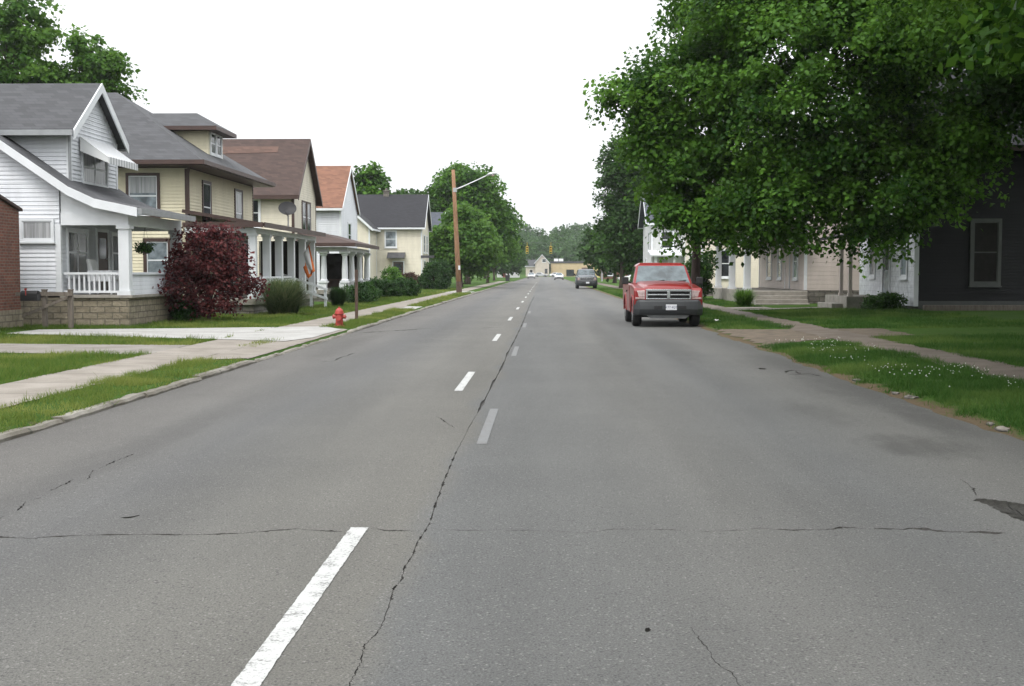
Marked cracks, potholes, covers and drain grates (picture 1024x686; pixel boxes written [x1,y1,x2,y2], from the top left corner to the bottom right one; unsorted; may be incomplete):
pothole [973,498,1024,521]
crack [0,297,1002,686]
